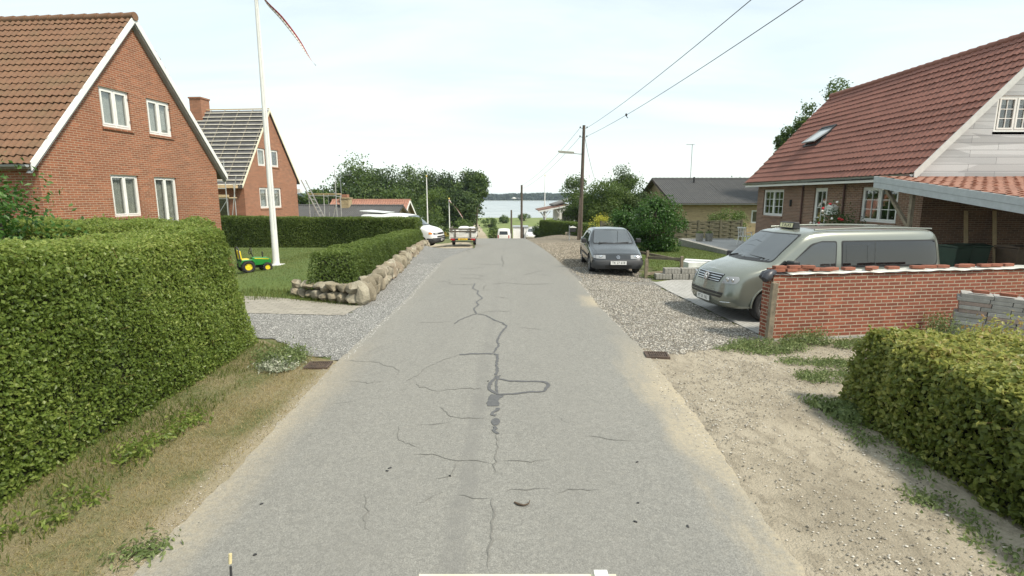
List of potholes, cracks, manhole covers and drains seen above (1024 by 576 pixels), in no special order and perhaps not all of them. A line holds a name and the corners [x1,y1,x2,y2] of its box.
crack [350,250,629,567]
